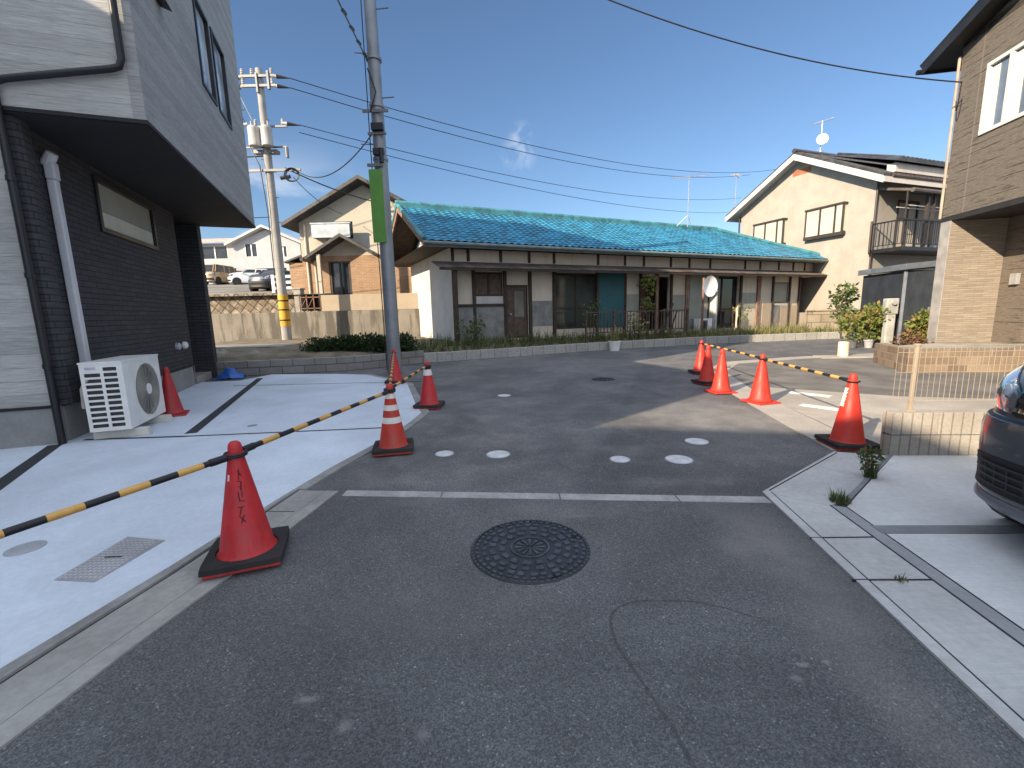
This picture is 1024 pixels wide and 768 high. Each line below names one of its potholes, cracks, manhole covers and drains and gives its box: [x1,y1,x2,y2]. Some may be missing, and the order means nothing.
manhole cover [470,519,591,585]
